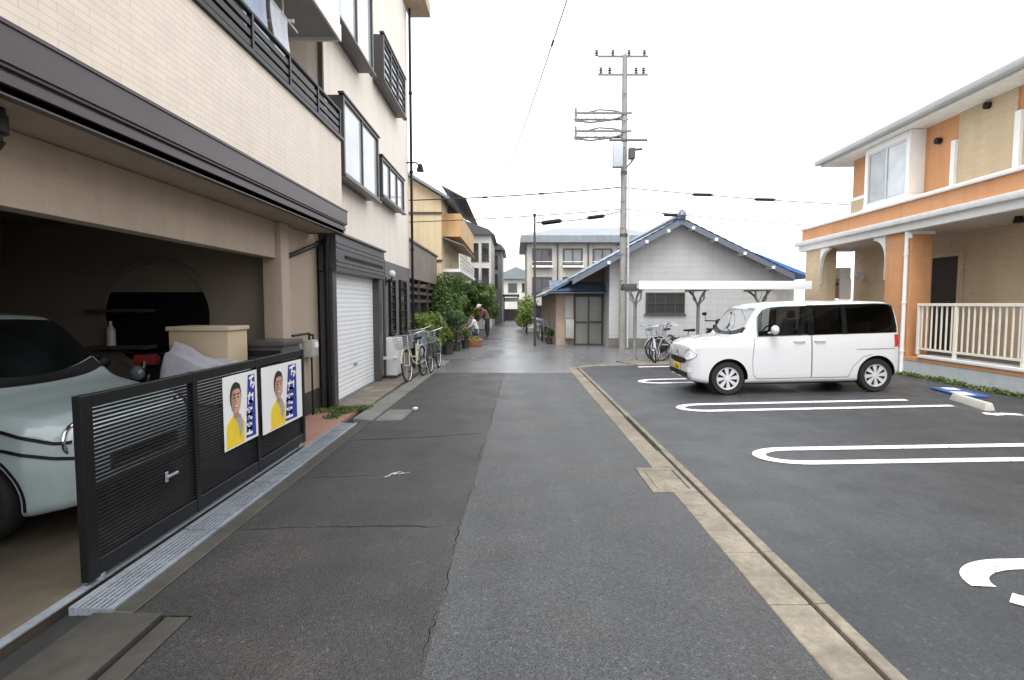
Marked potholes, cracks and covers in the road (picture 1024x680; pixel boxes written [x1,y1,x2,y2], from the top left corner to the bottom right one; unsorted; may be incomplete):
drain grate [68,422,358,616]
crack [423,379,503,651]
